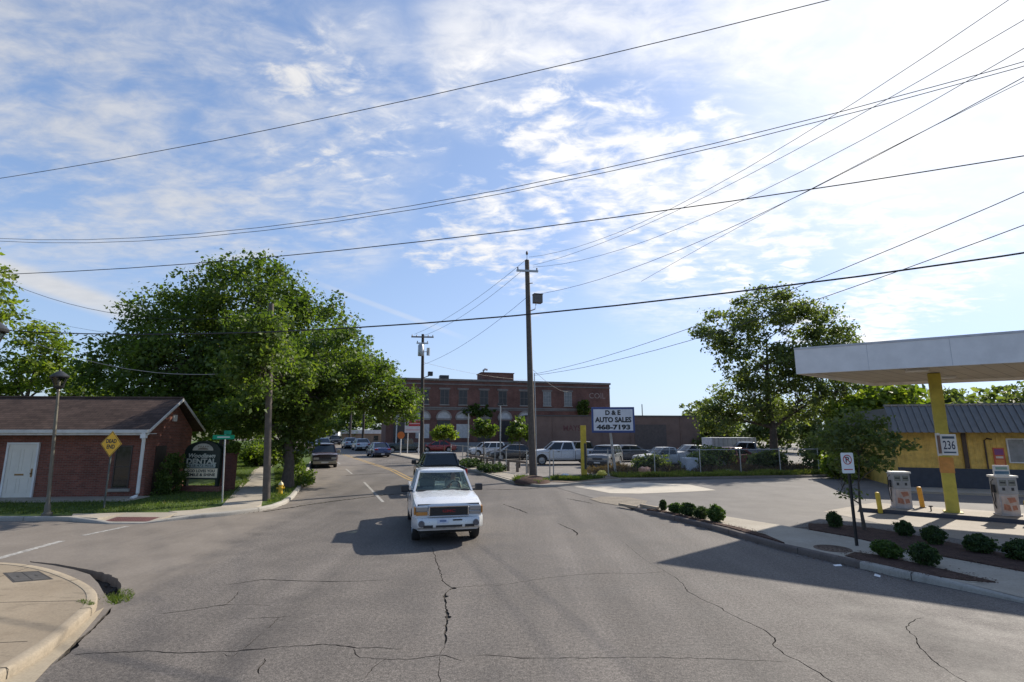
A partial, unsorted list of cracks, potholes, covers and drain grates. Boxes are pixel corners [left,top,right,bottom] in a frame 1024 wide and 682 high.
crack [77,545,832,682]
crack [906,618,966,682]
utility cover [3,571,53,583]
